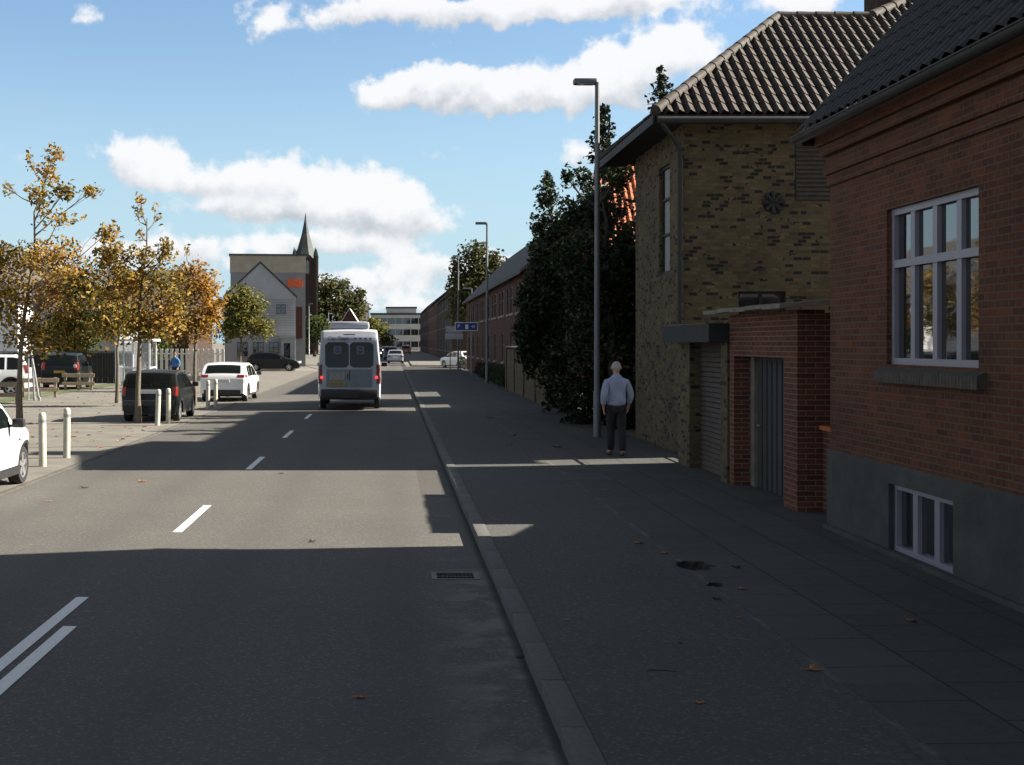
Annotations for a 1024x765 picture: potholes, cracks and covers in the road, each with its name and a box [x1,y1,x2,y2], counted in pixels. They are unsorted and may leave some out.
pothole [674,561,714,570]
drain grate [431,572,480,580]
